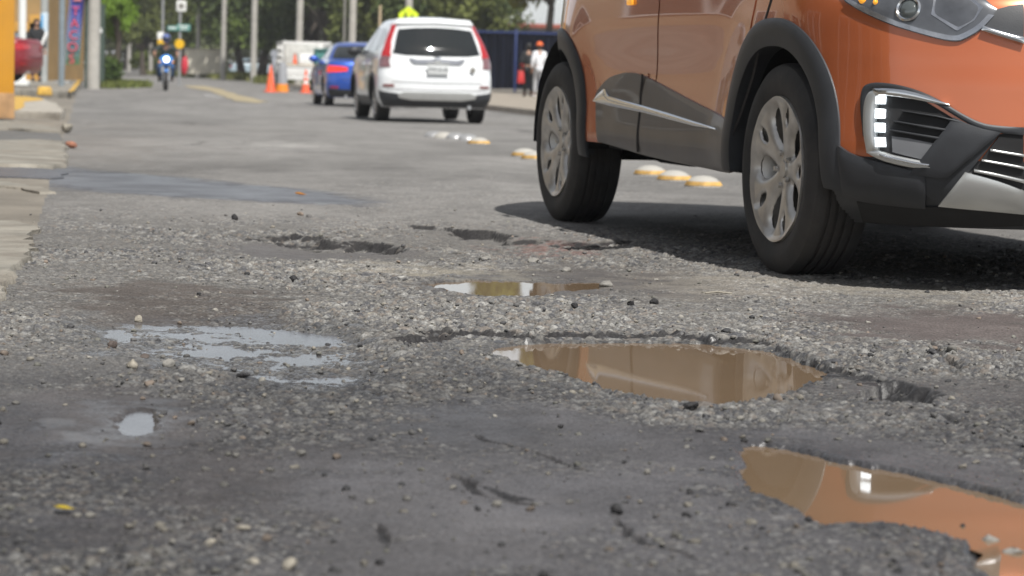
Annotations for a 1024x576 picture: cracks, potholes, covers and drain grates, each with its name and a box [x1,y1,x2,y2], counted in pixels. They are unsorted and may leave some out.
pothole [388,327,953,418]
pothole [83,406,166,442]
pothole [734,440,1024,576]
pothole [397,224,676,264]
pothole [403,265,717,304]
crack [446,473,551,505]
pothole [91,311,395,401]
pothole [200,233,413,261]
